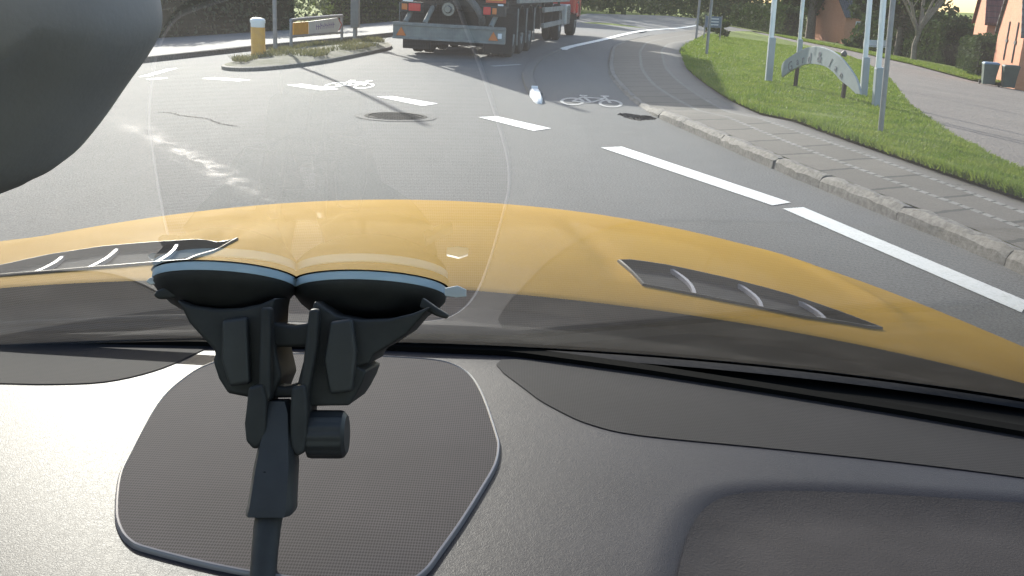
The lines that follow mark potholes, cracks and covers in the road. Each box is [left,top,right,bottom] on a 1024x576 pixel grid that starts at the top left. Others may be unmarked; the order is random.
manhole cover [354,111,437,121]
pothole [617,113,657,121]
